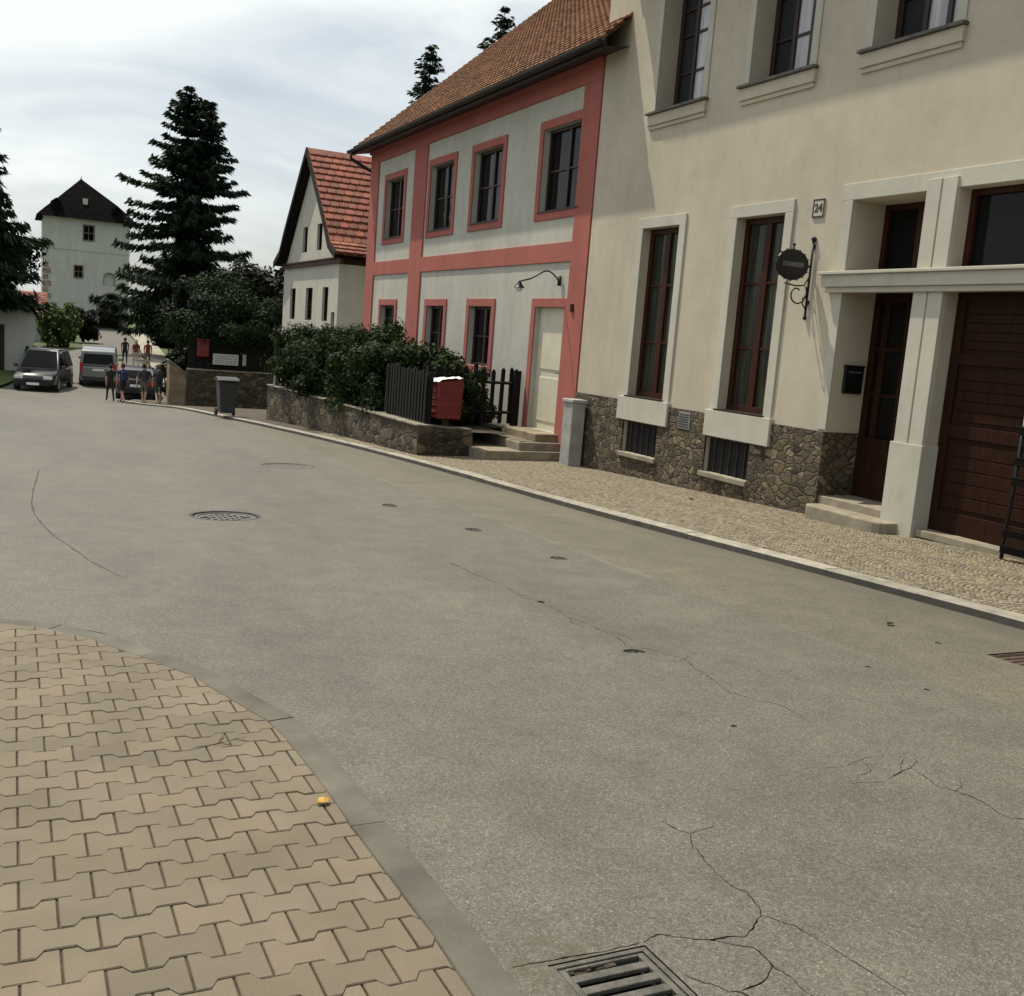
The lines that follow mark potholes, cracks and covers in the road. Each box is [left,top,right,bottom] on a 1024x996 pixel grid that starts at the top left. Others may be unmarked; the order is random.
crack [512,821,906,996]
manhole cover [189,511,261,521]
crack [31,471,123,578]
crack [449,562,806,720]
crack [190,734,248,750]
drain grate [549,947,696,996]
drain grate [990,653,1024,666]
crack [829,756,1021,819]
